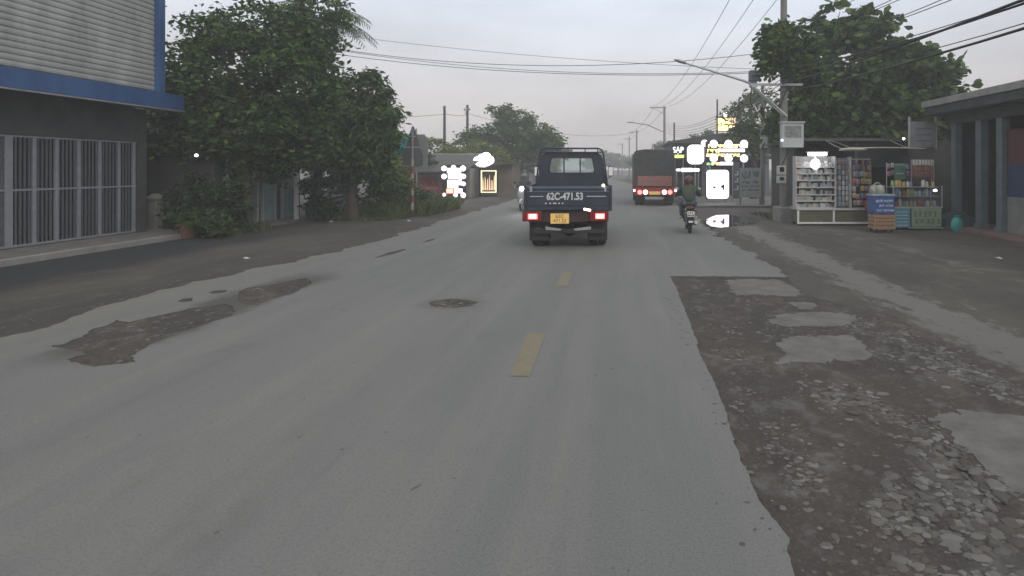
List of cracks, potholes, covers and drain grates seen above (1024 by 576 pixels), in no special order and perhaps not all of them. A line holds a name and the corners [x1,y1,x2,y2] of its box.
crack [375,249,405,258]
pothole [669,276,1024,576]
pothole [237,278,312,305]
pothole [51,304,235,367]
